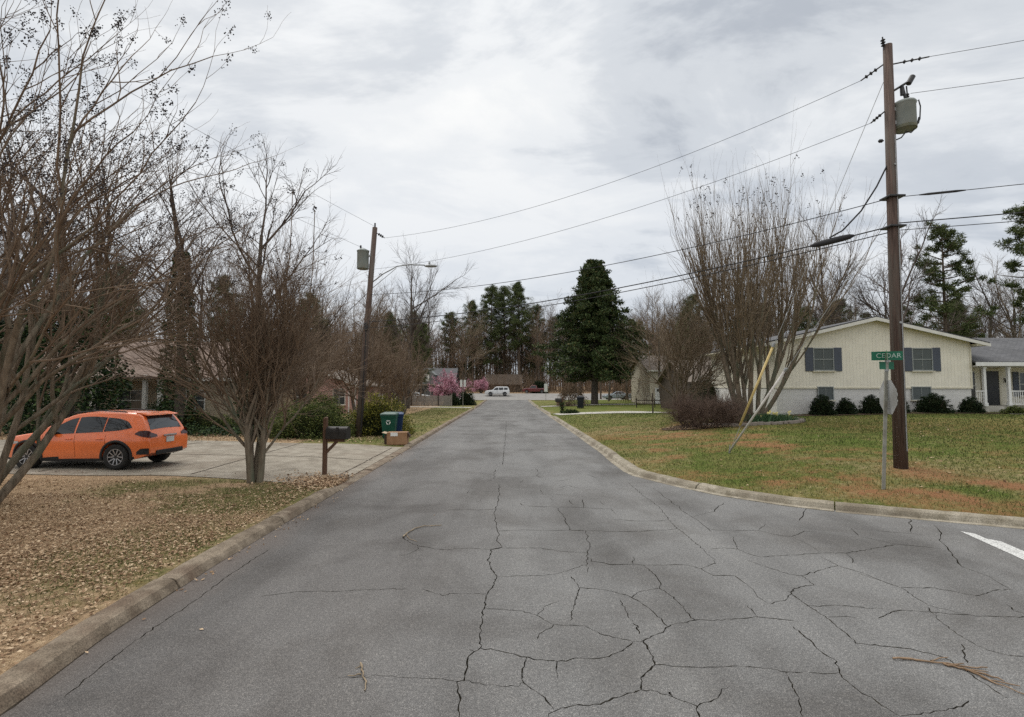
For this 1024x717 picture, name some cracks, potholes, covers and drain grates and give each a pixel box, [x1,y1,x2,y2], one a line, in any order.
crack [520,469,614,512]
crack [714,519,1024,697]
crack [261,588,395,597]
crack [341,483,969,717]
